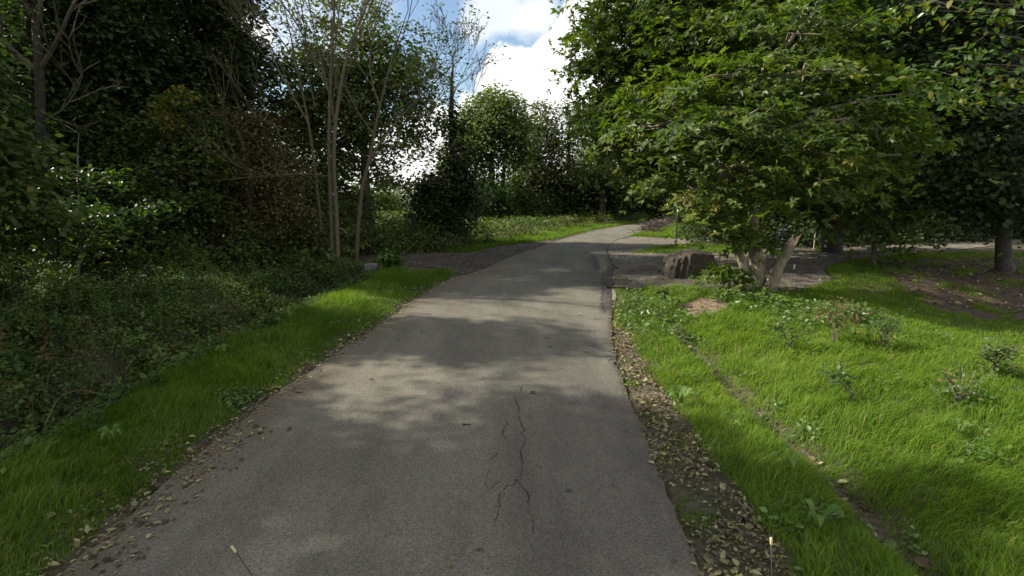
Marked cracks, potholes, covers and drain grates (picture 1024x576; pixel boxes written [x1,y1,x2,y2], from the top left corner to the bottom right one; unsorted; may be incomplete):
crack [485,387,535,534]
